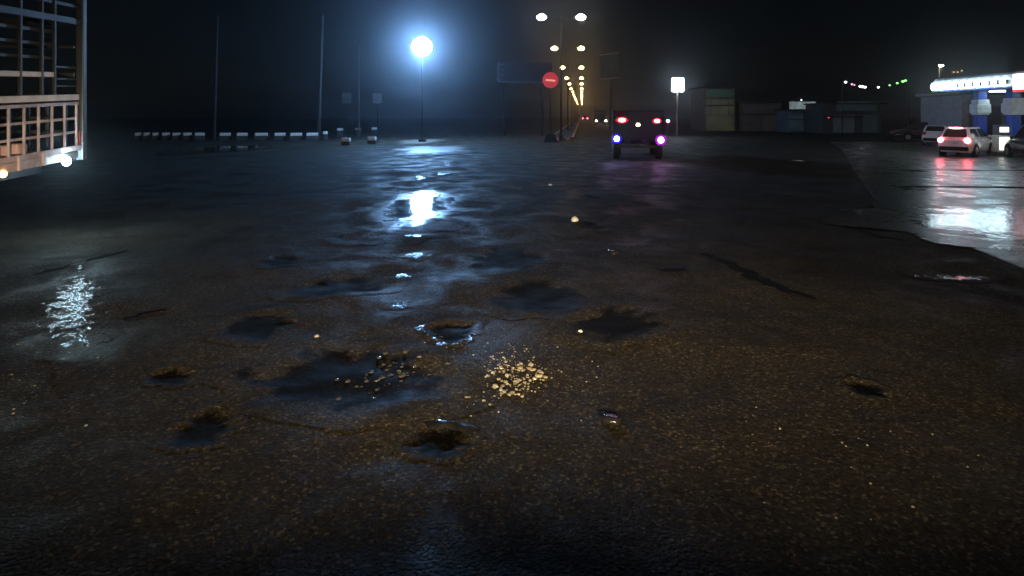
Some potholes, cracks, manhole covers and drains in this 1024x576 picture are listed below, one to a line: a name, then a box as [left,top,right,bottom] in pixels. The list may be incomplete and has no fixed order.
pothole [202,305,313,346]
pothole [148,401,250,453]
pothole [194,335,499,430]
crack [35,250,129,274]
pothole [387,416,490,464]
pothole [465,271,604,322]
pothole [834,374,900,402]
crack [657,253,817,299]
pothole [414,317,487,348]
pothole [134,362,210,389]
crack [123,309,166,320]
pothole [547,300,688,353]
